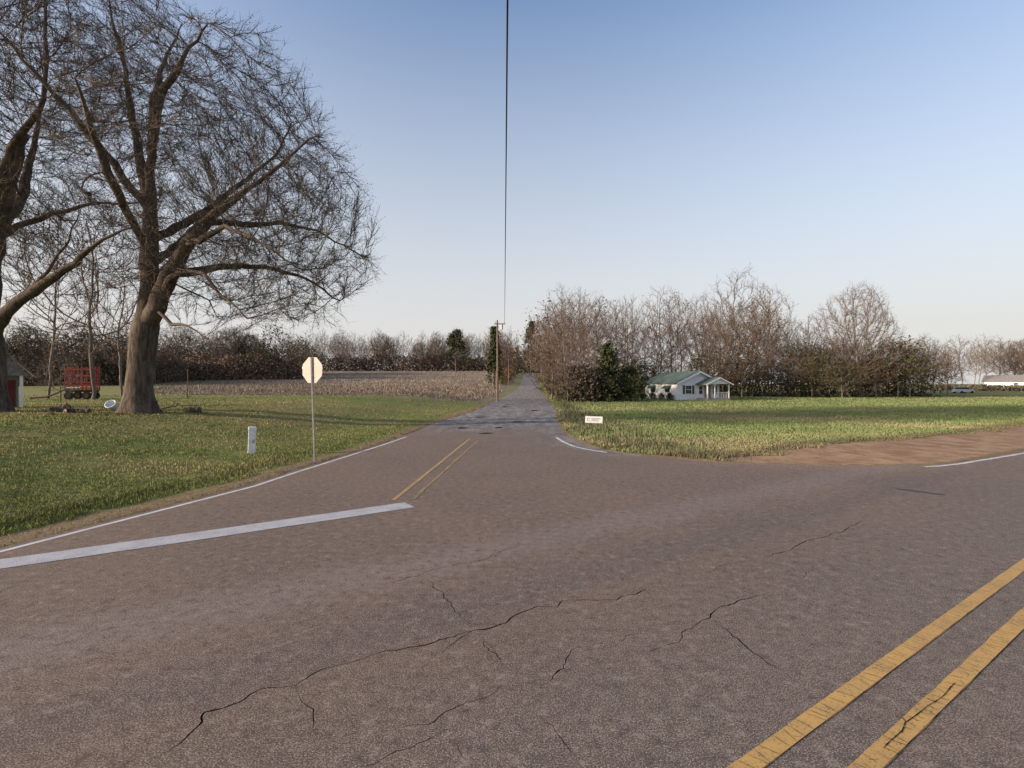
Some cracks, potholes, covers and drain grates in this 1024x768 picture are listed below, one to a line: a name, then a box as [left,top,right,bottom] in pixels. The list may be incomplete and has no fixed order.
crack [647,594,788,671]
crack [152,546,645,759]
